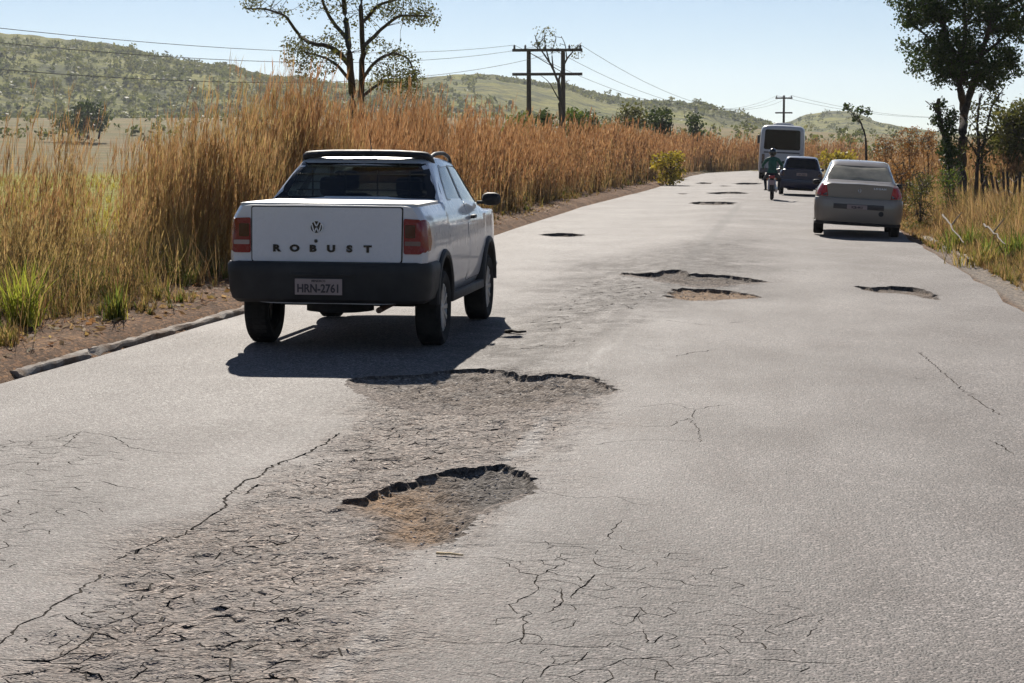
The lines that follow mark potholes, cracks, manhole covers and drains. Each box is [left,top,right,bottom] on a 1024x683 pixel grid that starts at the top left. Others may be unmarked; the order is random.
pothole [618,270,771,288]
pothole [854,286,940,300]
pothole [335,464,539,550]
crack [597,403,733,445]
pothole [344,368,619,417]
pothole [663,288,764,301]
crack [405,492,840,683]
crack [916,352,1014,454]
crack [0,422,531,683]
